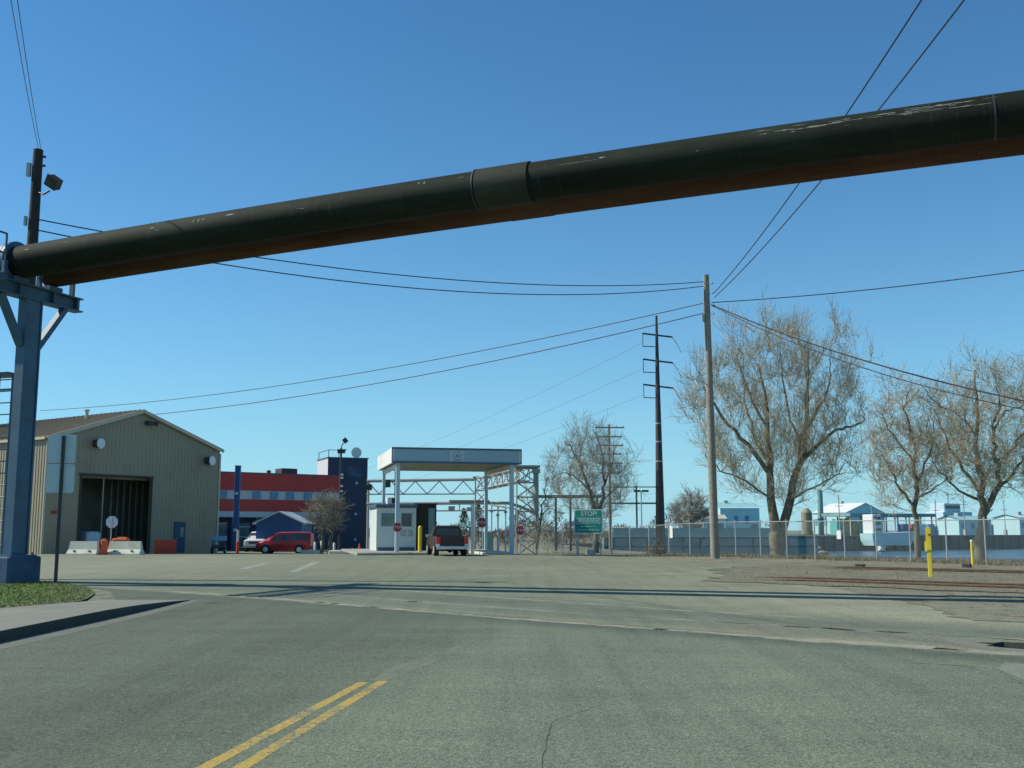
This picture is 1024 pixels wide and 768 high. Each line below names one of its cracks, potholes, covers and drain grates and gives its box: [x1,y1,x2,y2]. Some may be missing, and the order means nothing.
crack [541,707,592,768]
